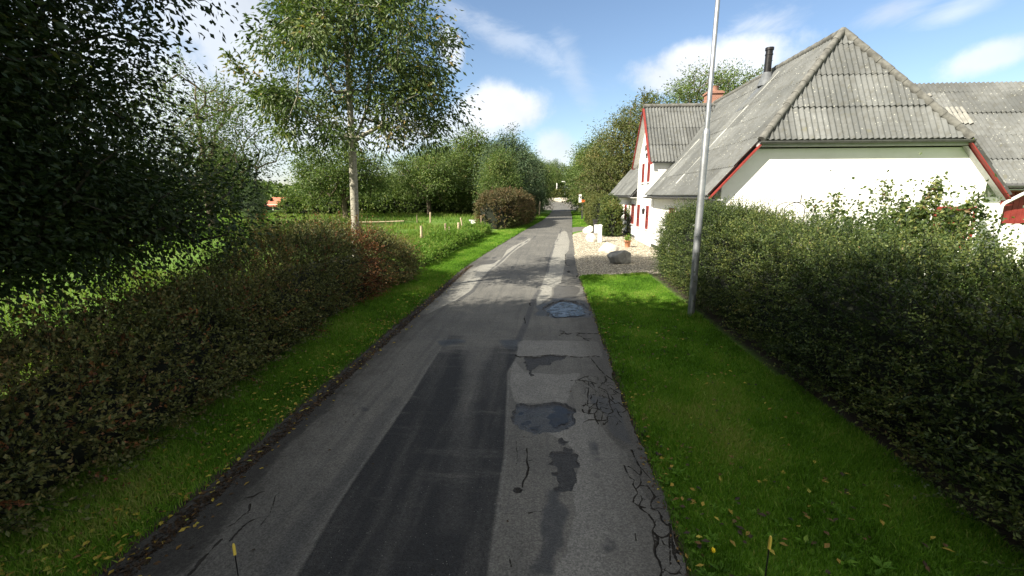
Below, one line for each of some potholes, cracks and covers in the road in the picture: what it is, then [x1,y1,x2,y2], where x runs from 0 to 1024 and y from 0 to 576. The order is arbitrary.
crack [187,491,280,576]
crack [622,450,682,576]
pothole [524,354,566,376]
pothole [548,437,580,492]
crack [515,331,627,425]
pothole [542,300,591,318]
pothole [510,402,576,435]
crack [516,442,531,488]
